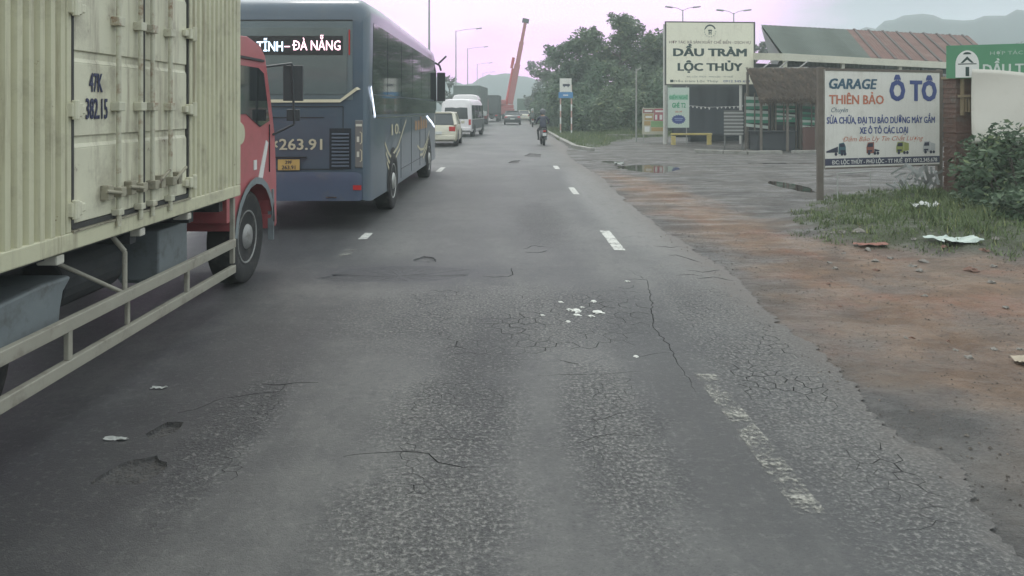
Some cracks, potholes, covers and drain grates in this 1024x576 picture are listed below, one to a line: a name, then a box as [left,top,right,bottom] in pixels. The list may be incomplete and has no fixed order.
crack [179,382,319,480]
pothole [146,422,183,441]
crack [415,275,696,503]
crack [348,378,506,495]
crack [678,286,960,530]
pothole [87,455,167,485]
